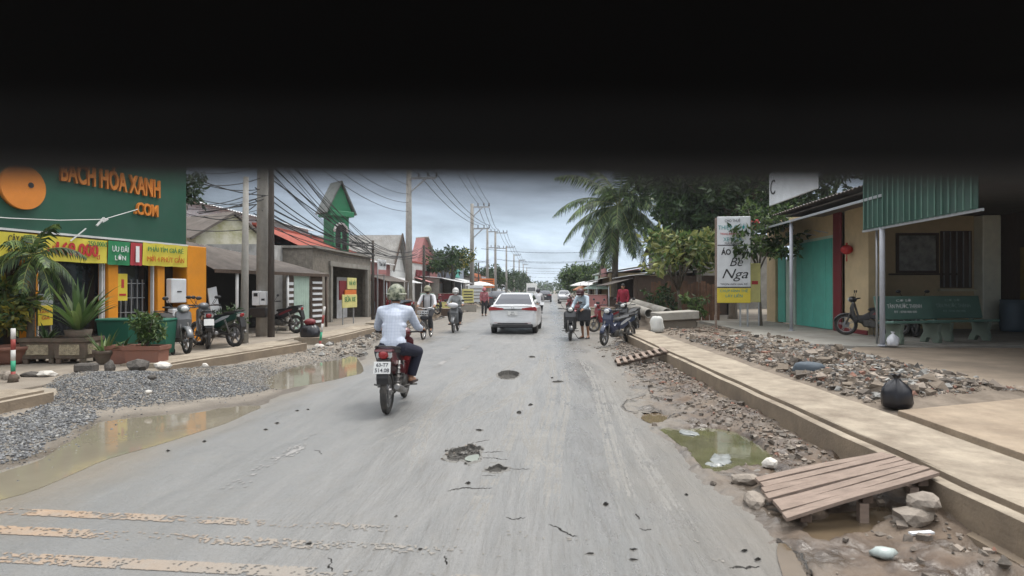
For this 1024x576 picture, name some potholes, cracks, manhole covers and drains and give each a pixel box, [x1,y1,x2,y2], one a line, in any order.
pothole [496,370,521,380]
crack [450,440,524,491]
pothole [441,443,485,466]
pothole [482,463,512,474]
